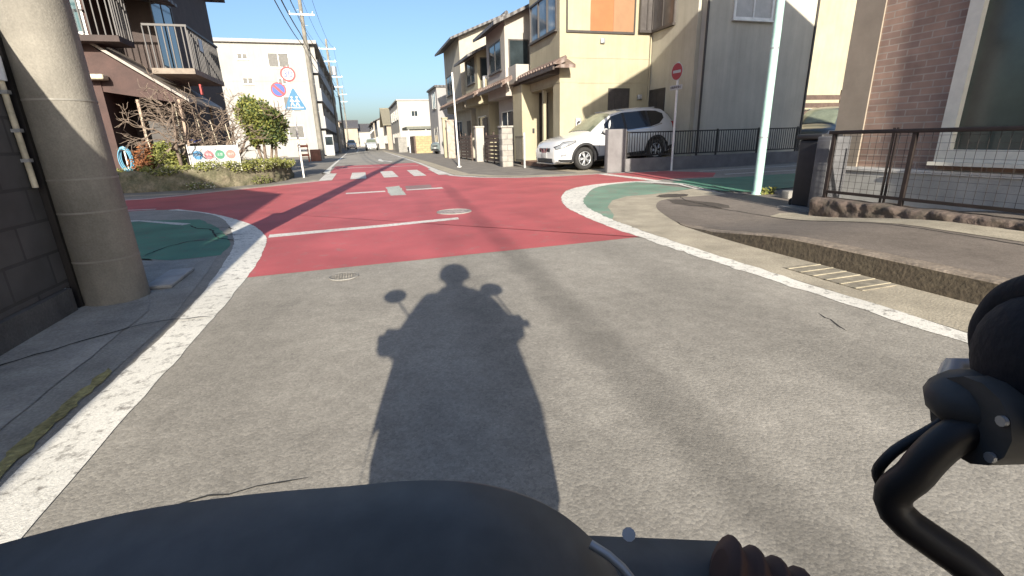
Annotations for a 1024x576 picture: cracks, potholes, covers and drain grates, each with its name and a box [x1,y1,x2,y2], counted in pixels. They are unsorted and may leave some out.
manhole cover [328,272,359,281]
drain grate [783,263,896,291]
crack [182,477,308,503]
crack [146,225,239,255]
